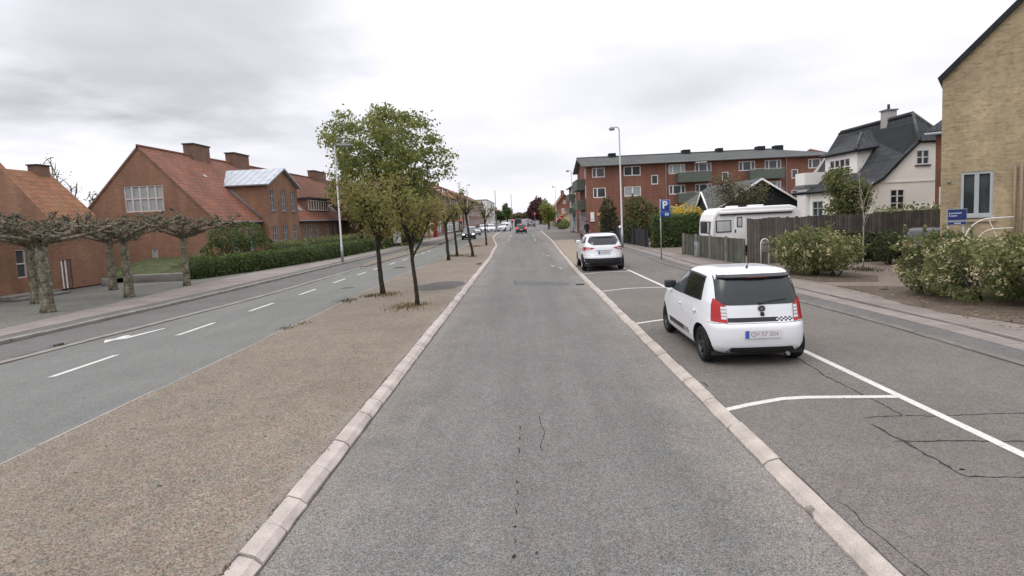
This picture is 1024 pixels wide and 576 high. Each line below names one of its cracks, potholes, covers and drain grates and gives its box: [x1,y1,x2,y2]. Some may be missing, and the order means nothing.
crack [872,424,1024,478]
crack [835,500,930,576]
